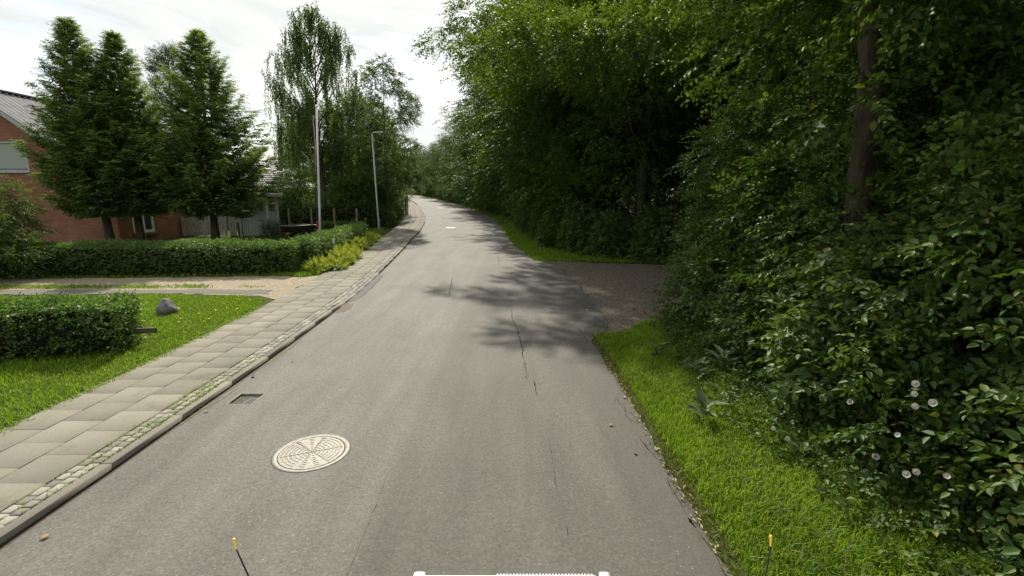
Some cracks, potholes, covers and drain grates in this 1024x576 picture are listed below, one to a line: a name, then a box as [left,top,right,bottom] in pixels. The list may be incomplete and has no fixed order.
crack [511,311,547,394]
drain grate [225,393,266,405]
manhole cover [271,434,351,473]
